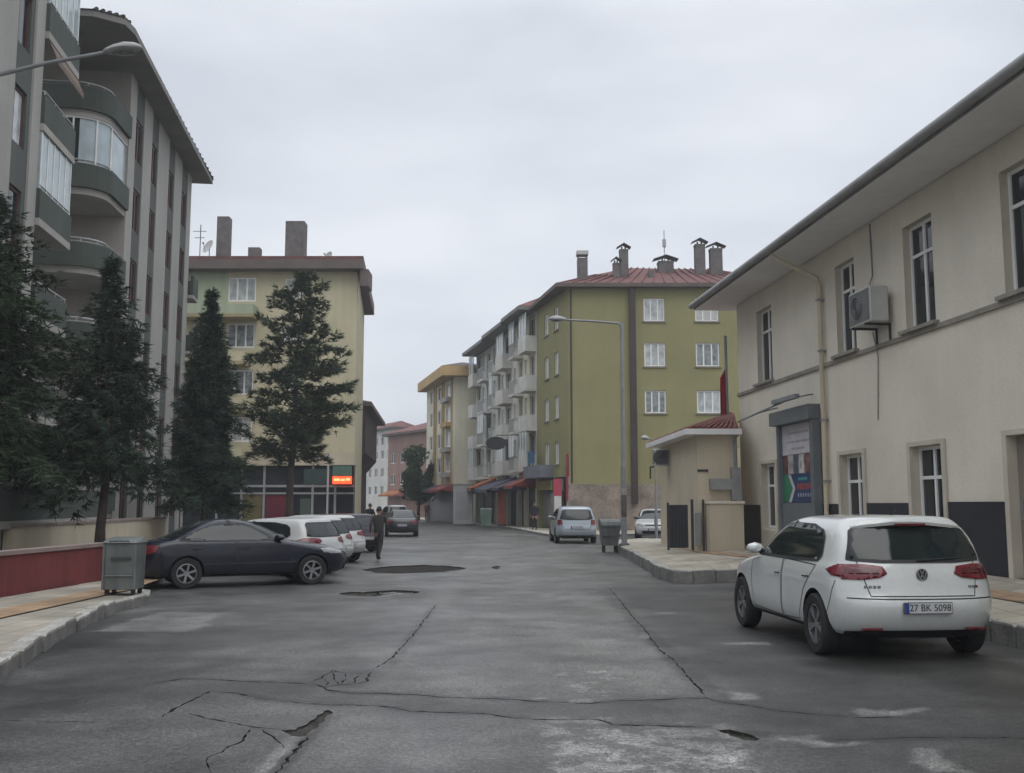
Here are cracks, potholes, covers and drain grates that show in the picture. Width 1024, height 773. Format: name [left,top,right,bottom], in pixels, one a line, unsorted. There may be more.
pothole [719,729,759,741]
crack [153,589,899,773]
pothole [363,565,465,574]
pothole [281,710,333,737]
